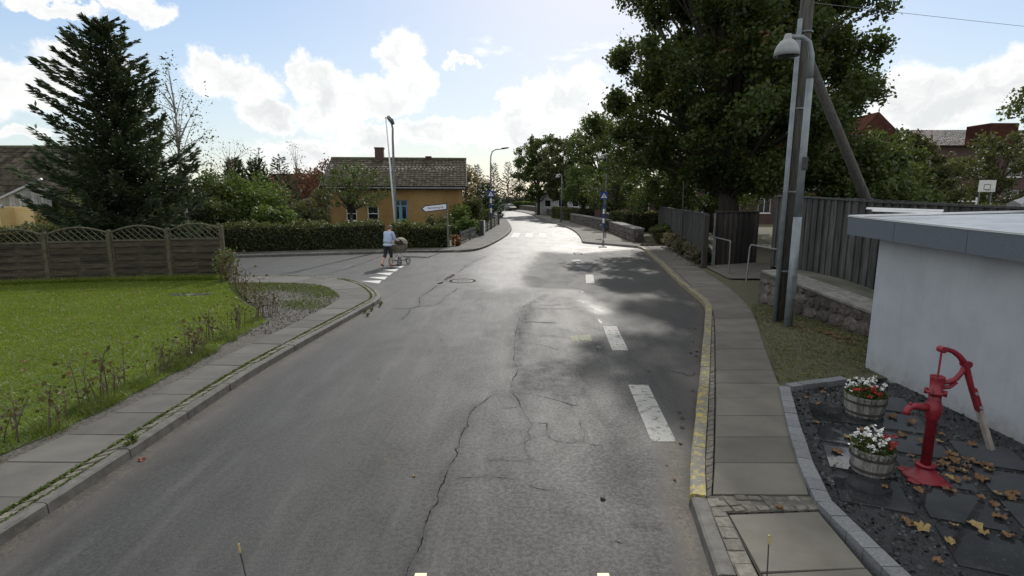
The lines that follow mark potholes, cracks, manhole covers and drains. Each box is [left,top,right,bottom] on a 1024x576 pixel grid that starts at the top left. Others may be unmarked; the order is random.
crack [406,298,600,574]
